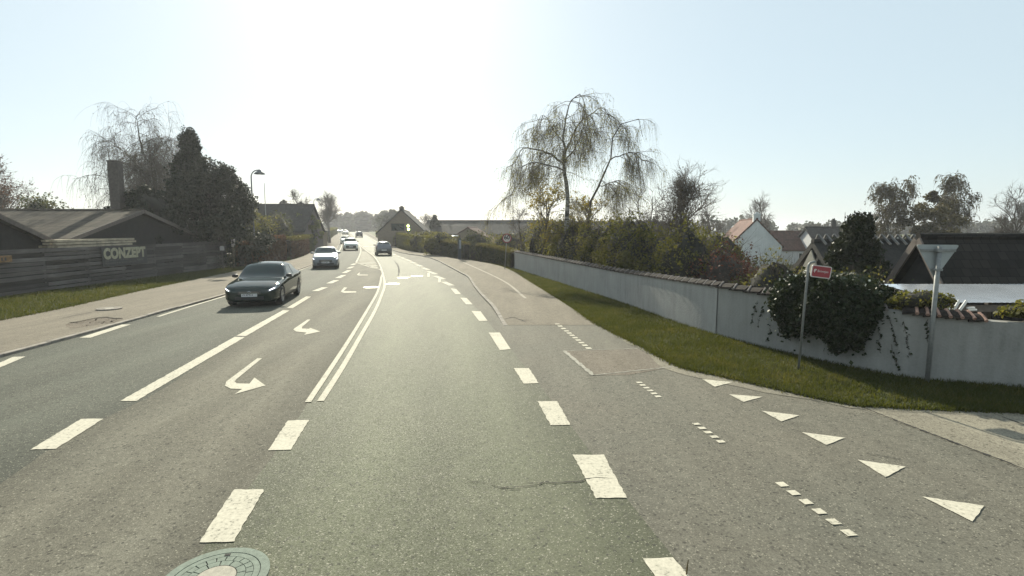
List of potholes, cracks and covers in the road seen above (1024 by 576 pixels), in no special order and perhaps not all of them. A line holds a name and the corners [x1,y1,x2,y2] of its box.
manhole cover [166,547,270,576]
crack [468,477,604,489]
